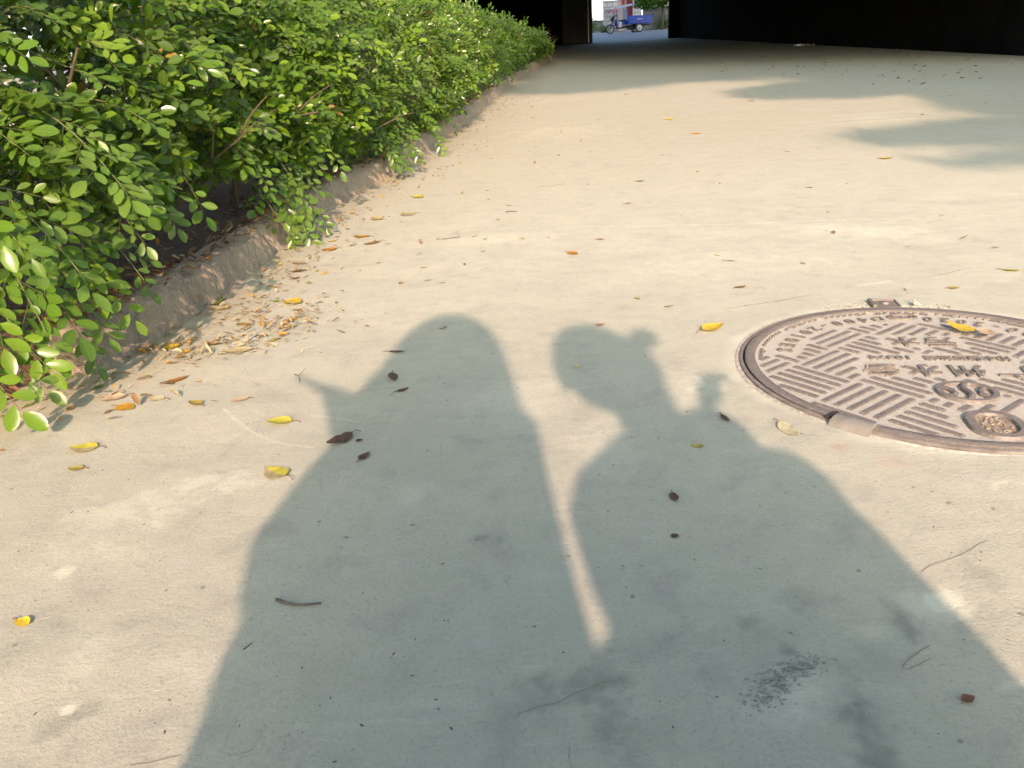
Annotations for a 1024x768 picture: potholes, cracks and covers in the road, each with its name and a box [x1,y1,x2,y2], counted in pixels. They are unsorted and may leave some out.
crack [516,677,623,715]
manhole cover [733,298,1024,456]
